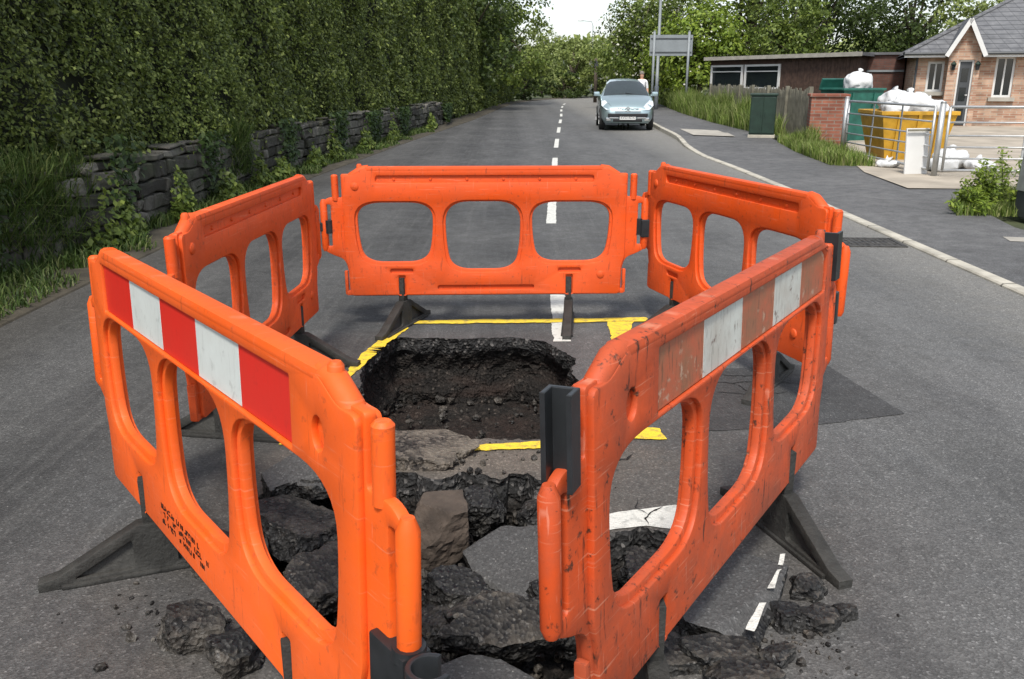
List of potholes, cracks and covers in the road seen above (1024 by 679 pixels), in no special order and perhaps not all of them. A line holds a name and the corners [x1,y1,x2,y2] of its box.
drain grate [842,237,908,248]
pothole [358,337,579,440]
pothole [258,471,667,679]
